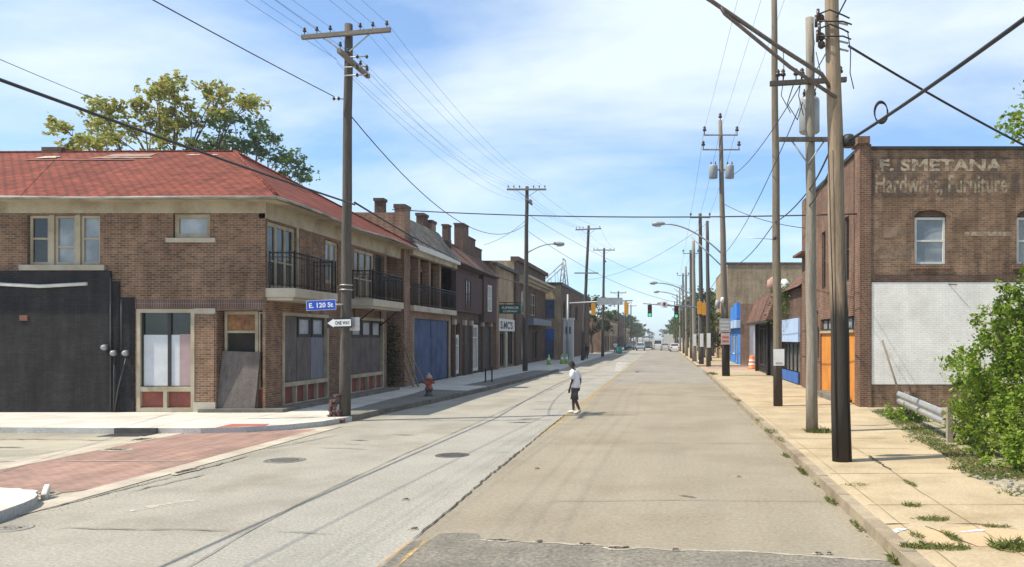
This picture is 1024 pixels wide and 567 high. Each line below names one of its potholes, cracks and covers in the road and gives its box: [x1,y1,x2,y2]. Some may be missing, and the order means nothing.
manhole cover [0,524,35,533]
